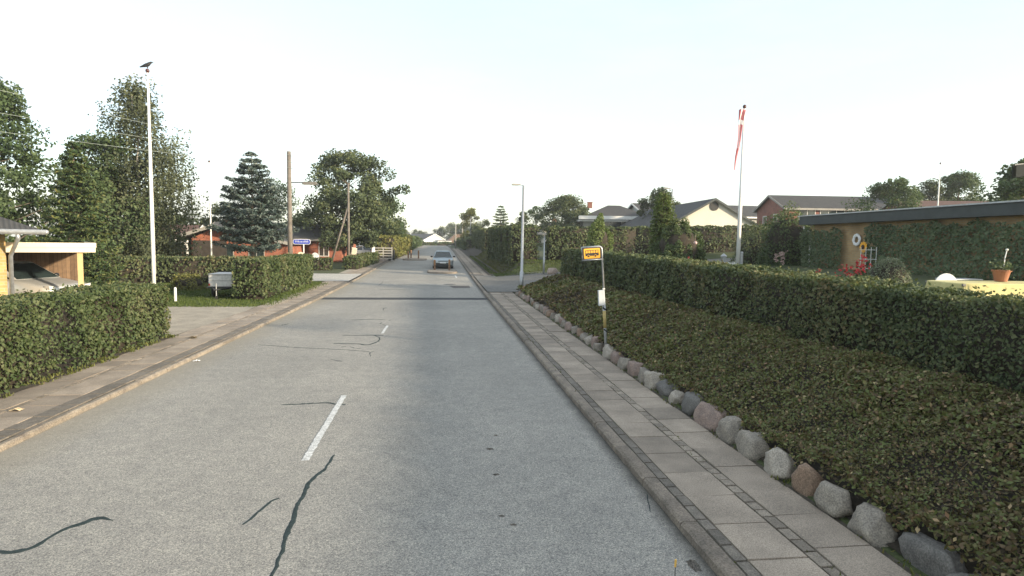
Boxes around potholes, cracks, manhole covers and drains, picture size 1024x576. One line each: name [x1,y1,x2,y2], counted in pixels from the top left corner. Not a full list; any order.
crack [267,345,371,361]
